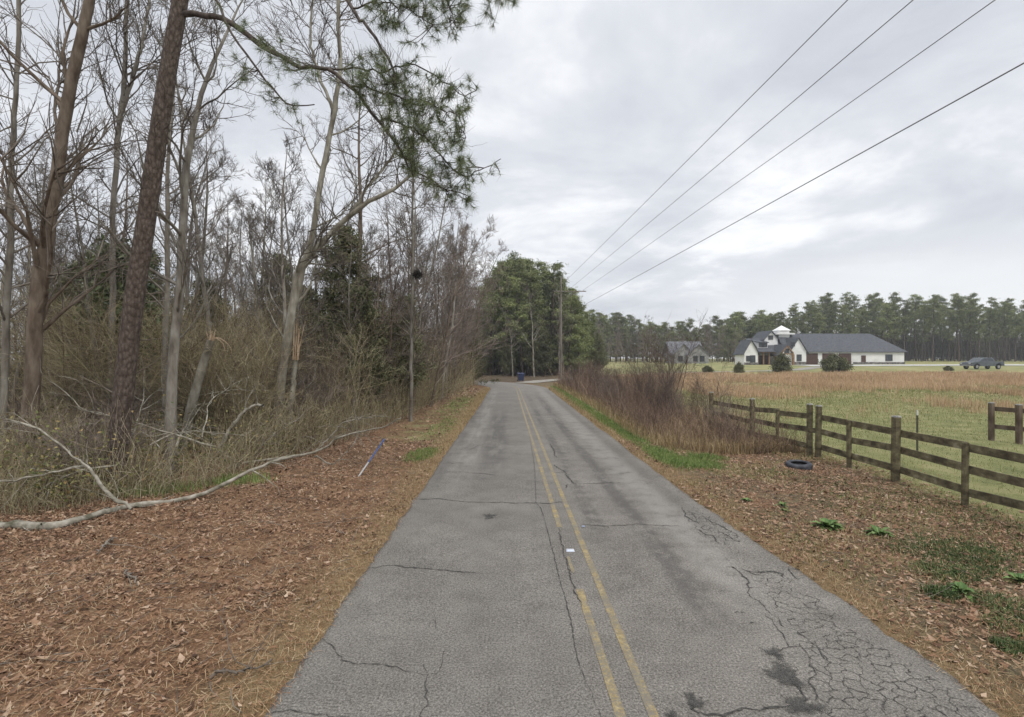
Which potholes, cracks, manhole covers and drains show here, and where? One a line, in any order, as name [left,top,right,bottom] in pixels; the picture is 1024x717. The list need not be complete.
crack [320,638,447,717]
crack [586,507,740,544]
crack [433,444,619,503]
crack [558,529,582,603]
crack [690,566,980,717]
